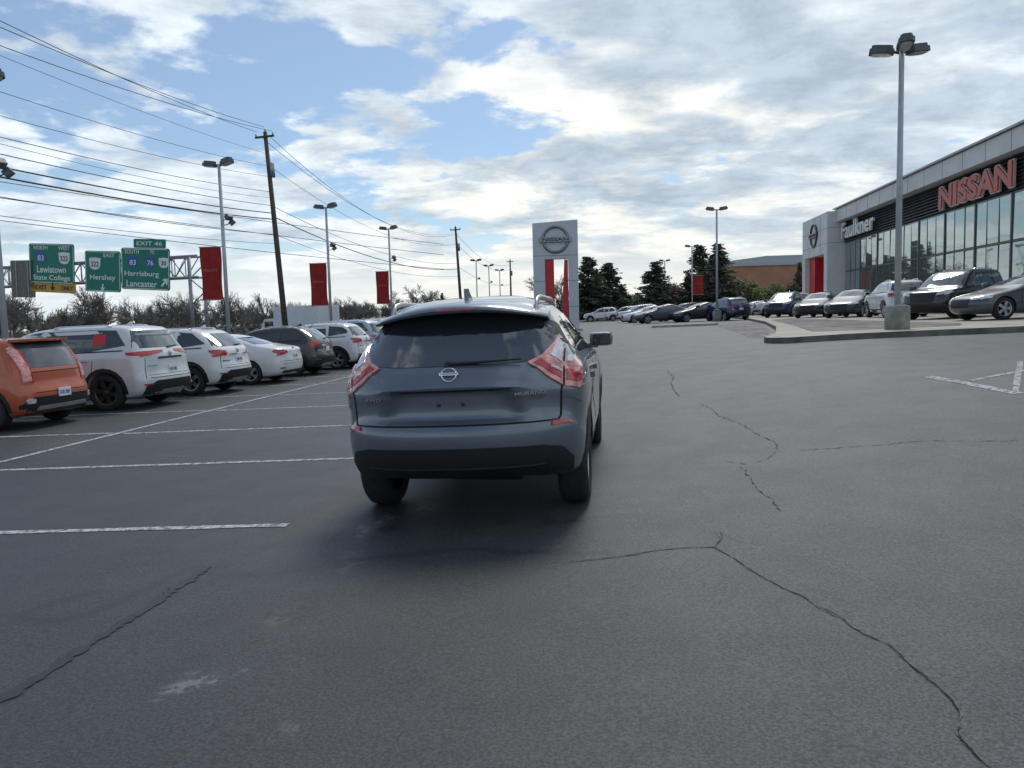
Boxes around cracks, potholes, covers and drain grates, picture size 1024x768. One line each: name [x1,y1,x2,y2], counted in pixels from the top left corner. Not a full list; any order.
crack [570,531,991,768]
